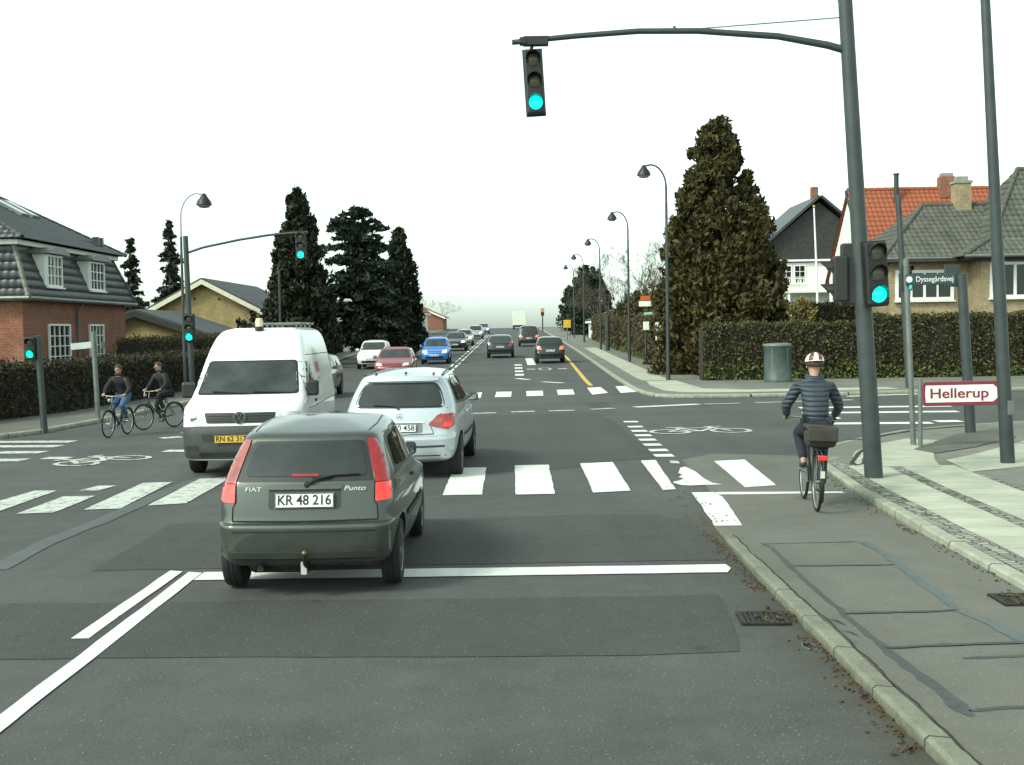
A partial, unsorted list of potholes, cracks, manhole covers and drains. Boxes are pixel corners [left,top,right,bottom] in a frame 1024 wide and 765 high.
drain grate [735,610,796,626]
drain grate [987,591,1024,606]
